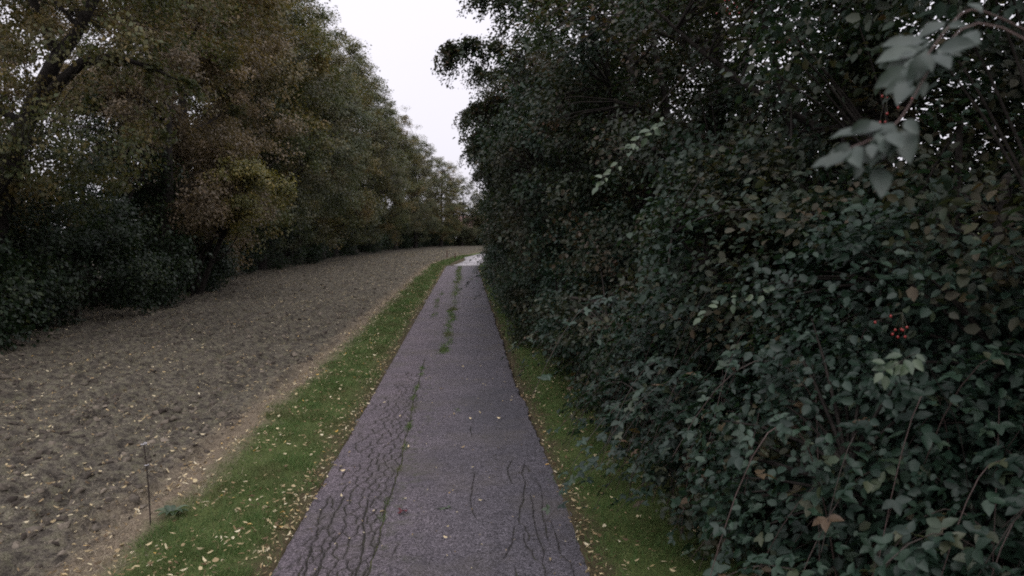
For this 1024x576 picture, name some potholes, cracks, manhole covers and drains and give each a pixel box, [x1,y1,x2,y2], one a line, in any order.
crack [507,462,575,576]
crack [298,361,425,576]
